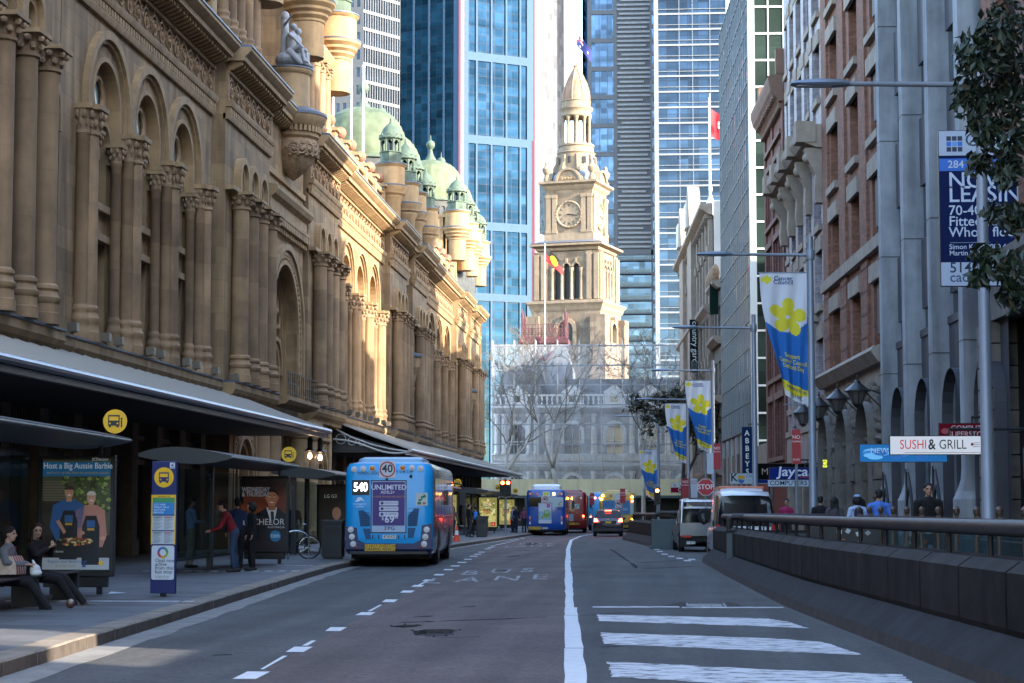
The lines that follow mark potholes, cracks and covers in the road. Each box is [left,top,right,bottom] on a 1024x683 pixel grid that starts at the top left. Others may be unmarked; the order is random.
crack [398,606,534,638]
pothole [411,629,461,637]
